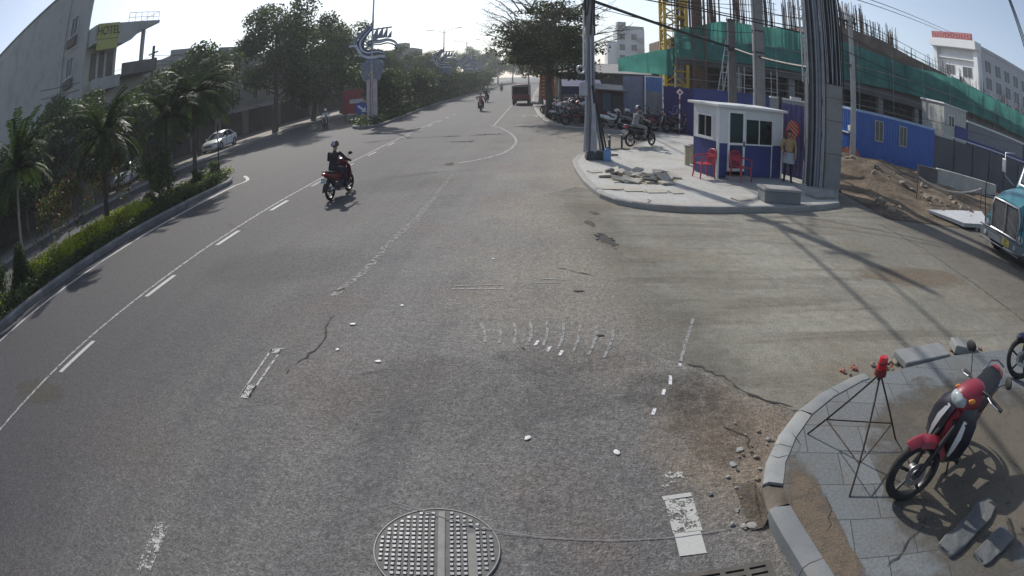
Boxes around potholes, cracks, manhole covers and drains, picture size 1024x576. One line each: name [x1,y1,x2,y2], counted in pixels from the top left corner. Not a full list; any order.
crack [689,364,792,453]
drain grate [670,559,777,576]
pothole [594,231,620,249]
crack [287,315,335,372]
manhole cover [373,508,501,576]
